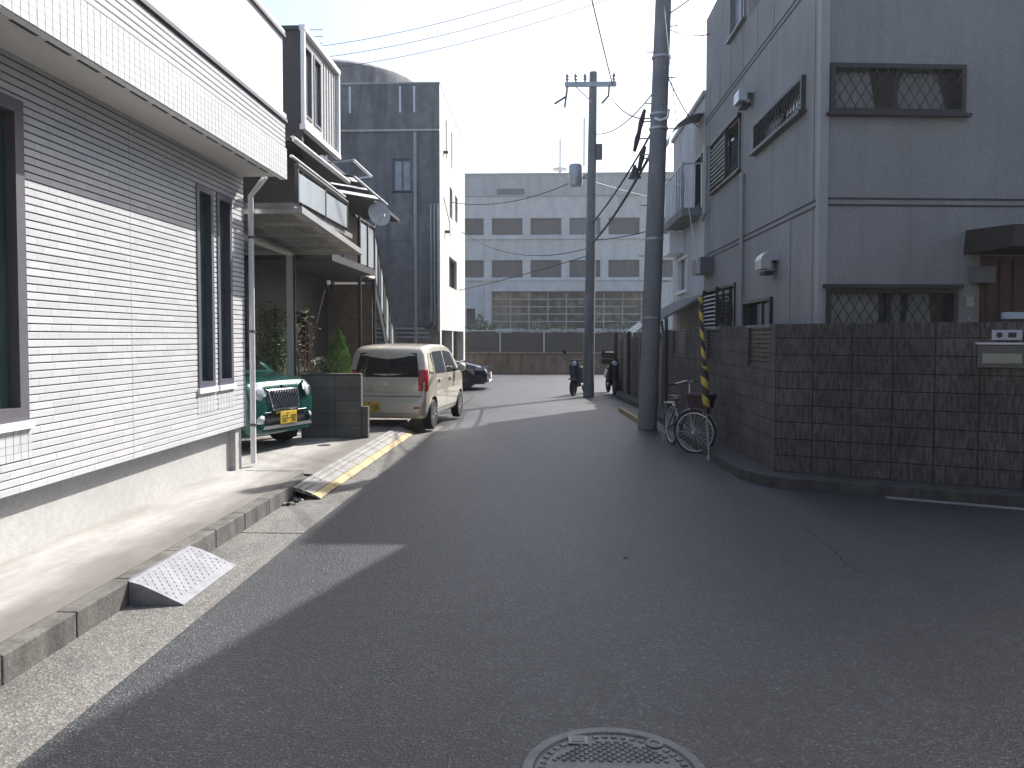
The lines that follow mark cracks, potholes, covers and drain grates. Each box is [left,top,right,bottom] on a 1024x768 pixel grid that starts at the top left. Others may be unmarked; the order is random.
manhole cover [522,727,705,768]
